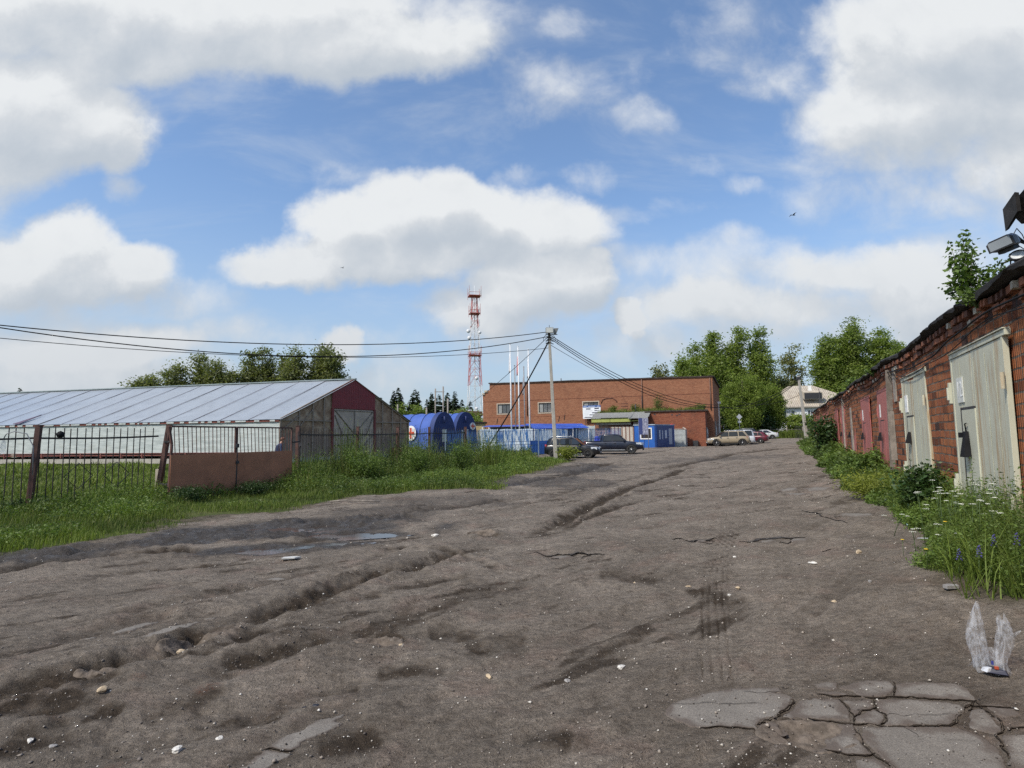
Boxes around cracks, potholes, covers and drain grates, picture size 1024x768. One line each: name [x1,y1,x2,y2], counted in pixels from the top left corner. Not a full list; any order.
crack [742,536,805,544]
pothole [155,631,222,655]
crack [674,681,1024,768]
crack [534,551,605,559]
